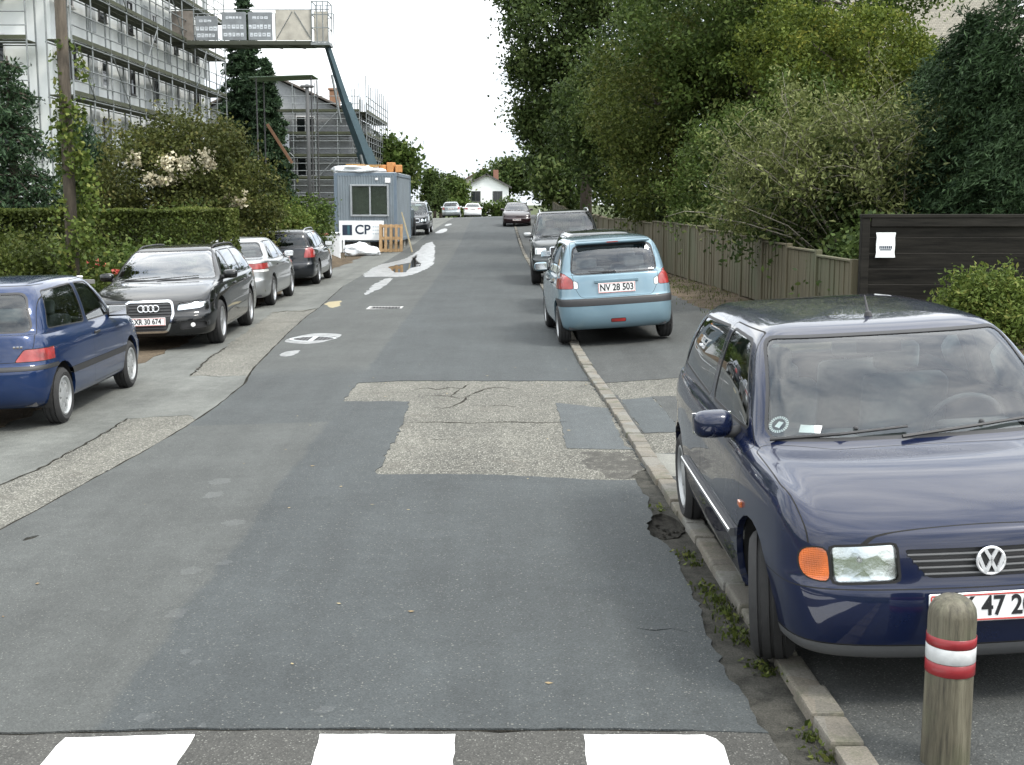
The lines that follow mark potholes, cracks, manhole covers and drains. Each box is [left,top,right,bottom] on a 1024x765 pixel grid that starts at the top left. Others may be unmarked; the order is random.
pothole [647,513,685,540]
crack [403,385,556,440]
